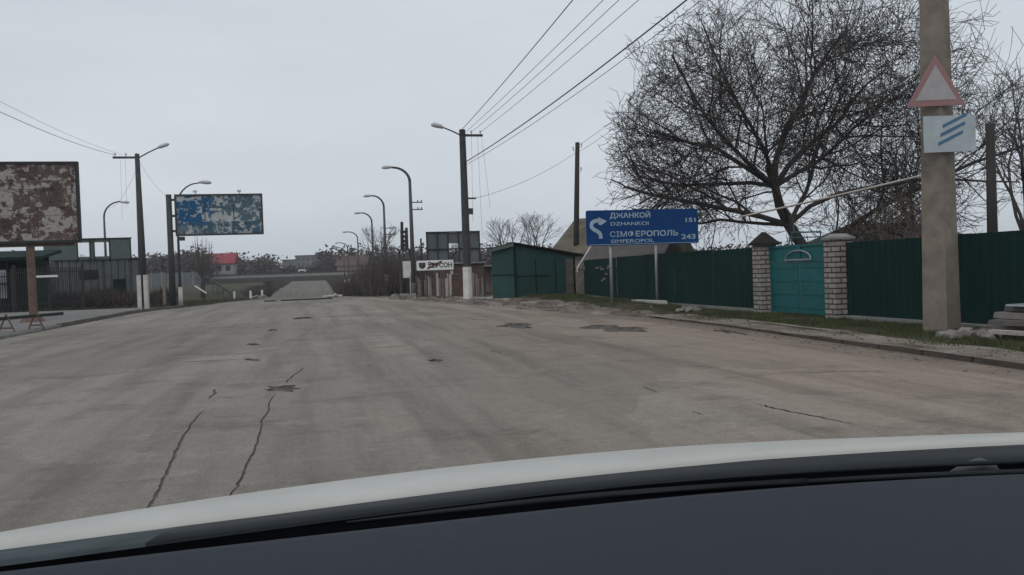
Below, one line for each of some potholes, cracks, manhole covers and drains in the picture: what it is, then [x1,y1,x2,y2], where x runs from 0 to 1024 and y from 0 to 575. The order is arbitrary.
crack [146,368,303,508]
crack [759,404,853,425]
